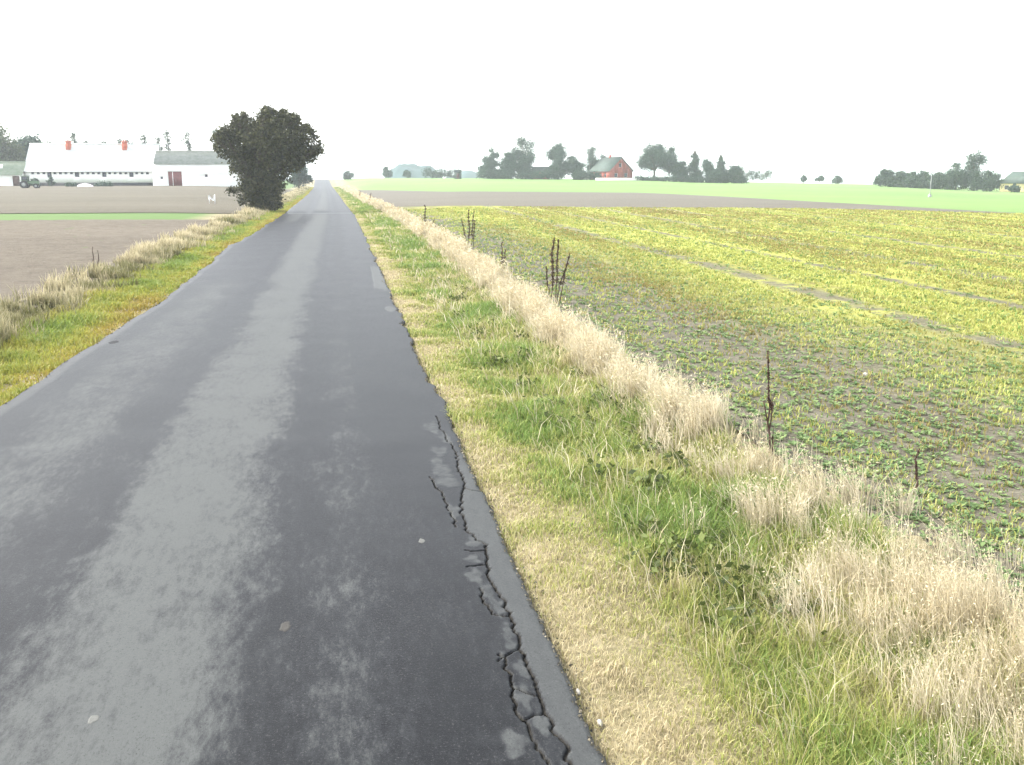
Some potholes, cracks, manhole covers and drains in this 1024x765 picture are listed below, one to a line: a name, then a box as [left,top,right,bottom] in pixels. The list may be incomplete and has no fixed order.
crack [430,418,572,765]
